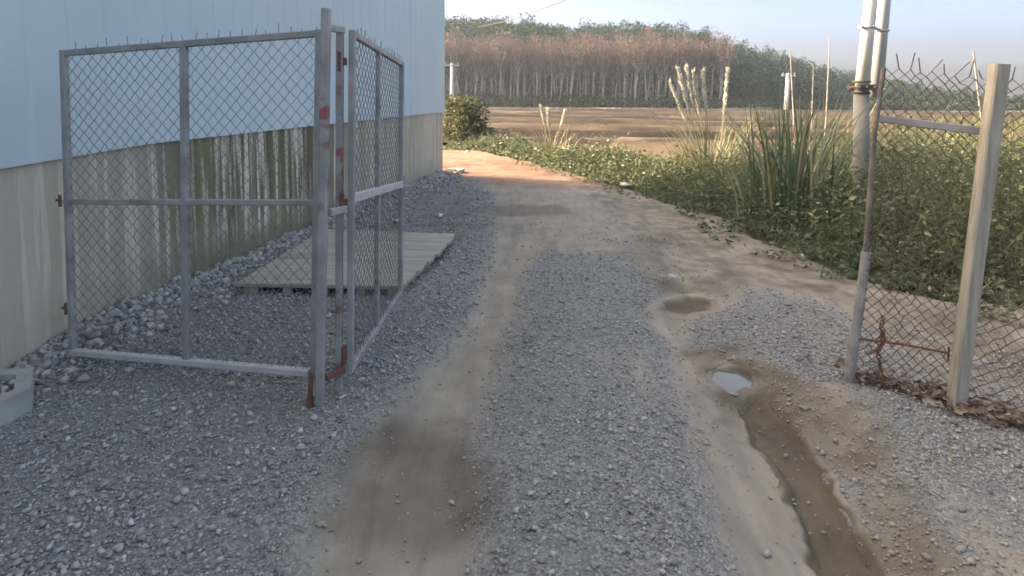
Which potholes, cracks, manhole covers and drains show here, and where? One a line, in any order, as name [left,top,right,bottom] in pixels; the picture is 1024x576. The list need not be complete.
pothole [644,294,725,321]
pothole [696,360,769,407]
